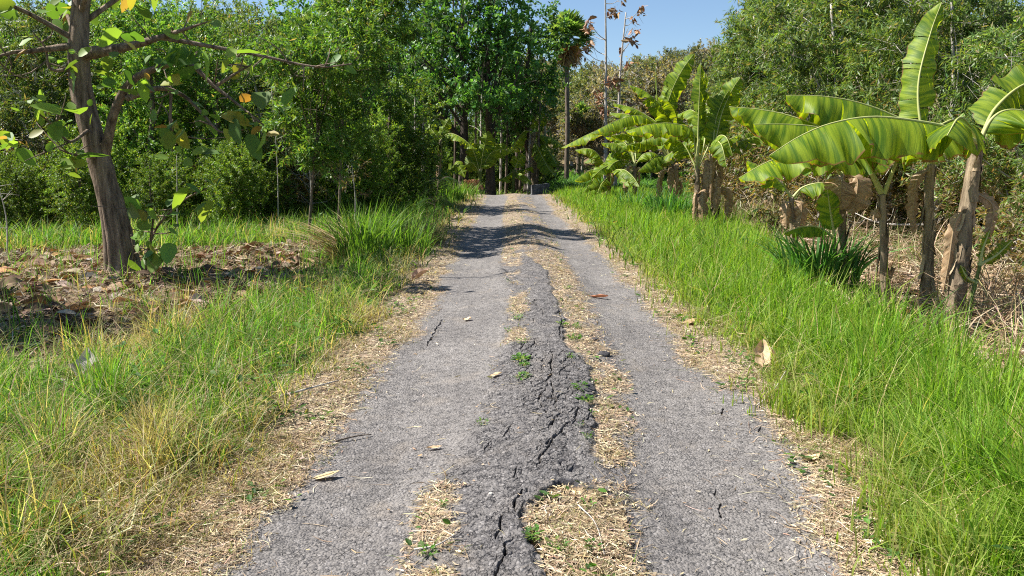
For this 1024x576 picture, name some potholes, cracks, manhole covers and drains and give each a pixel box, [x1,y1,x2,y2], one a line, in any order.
crack [712,406,766,434]
crack [709,487,730,525]
crack [477,298,605,576]
crack [423,319,445,349]
